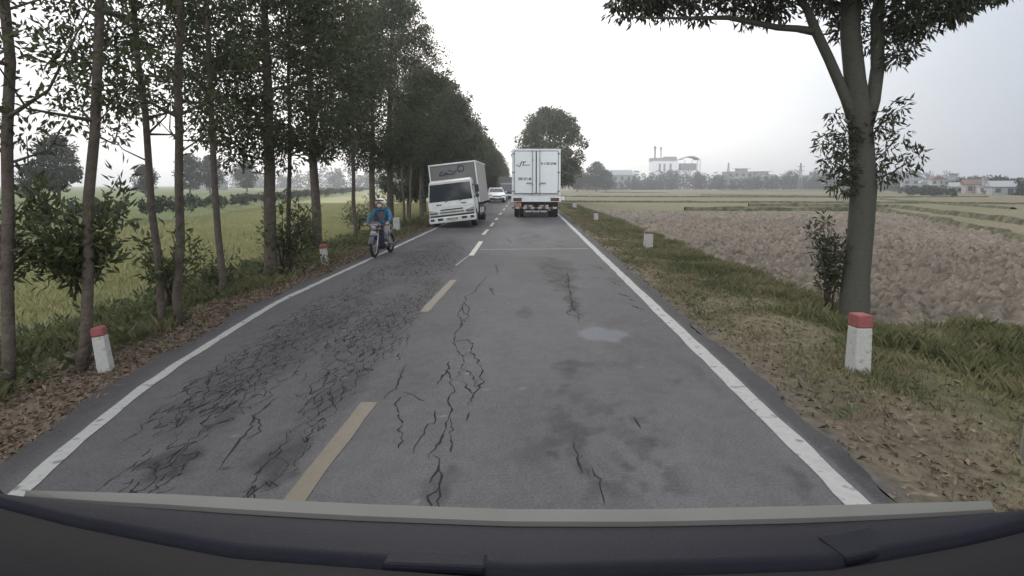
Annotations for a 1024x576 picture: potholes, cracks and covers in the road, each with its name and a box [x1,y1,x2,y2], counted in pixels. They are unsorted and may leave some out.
crack [565,270,581,324]
crack [95,238,485,507]
crack [573,442,605,504]
